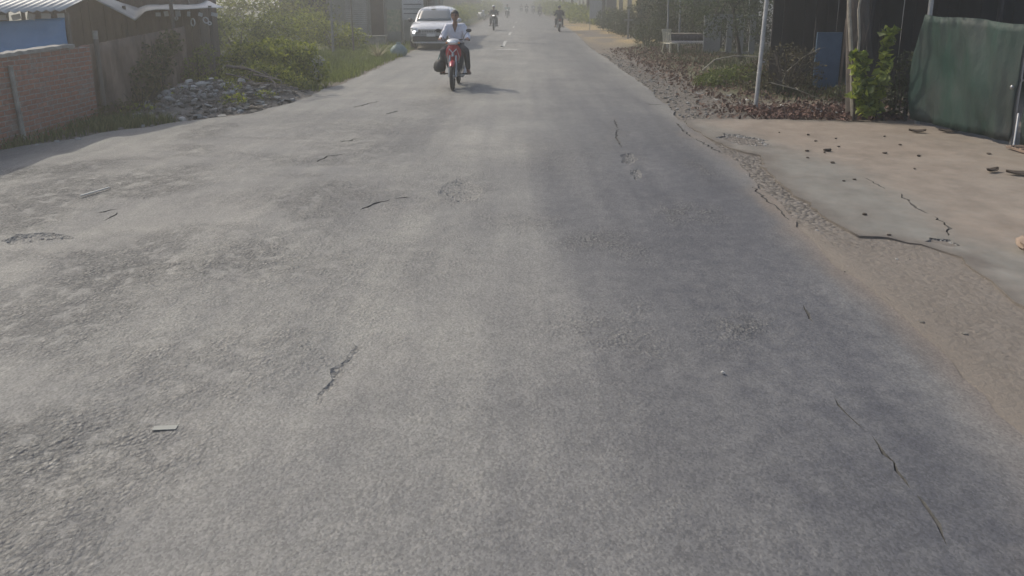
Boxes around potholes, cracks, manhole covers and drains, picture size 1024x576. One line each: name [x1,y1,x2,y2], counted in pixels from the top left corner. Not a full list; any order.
pothole [2,232,77,245]
pothole [716,133,770,147]
pothole [620,153,639,165]
pothole [629,168,642,181]
crack [752,187,789,220]
crack [866,178,952,236]
crack [834,397,947,545]
